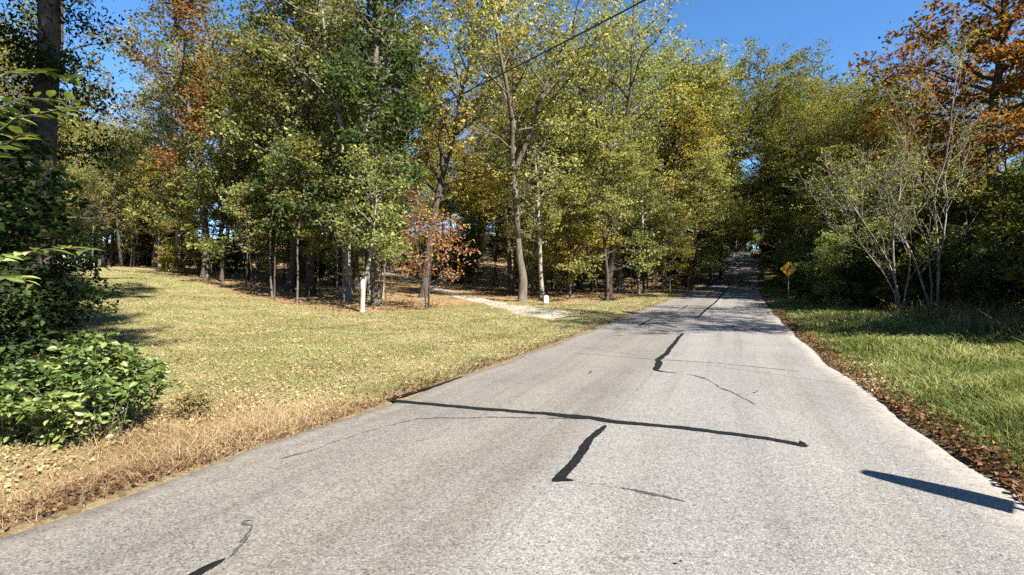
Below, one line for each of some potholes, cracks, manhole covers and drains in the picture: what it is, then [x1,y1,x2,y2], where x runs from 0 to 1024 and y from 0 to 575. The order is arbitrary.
crack [576,353,793,405]
crack [578,481,686,502]
